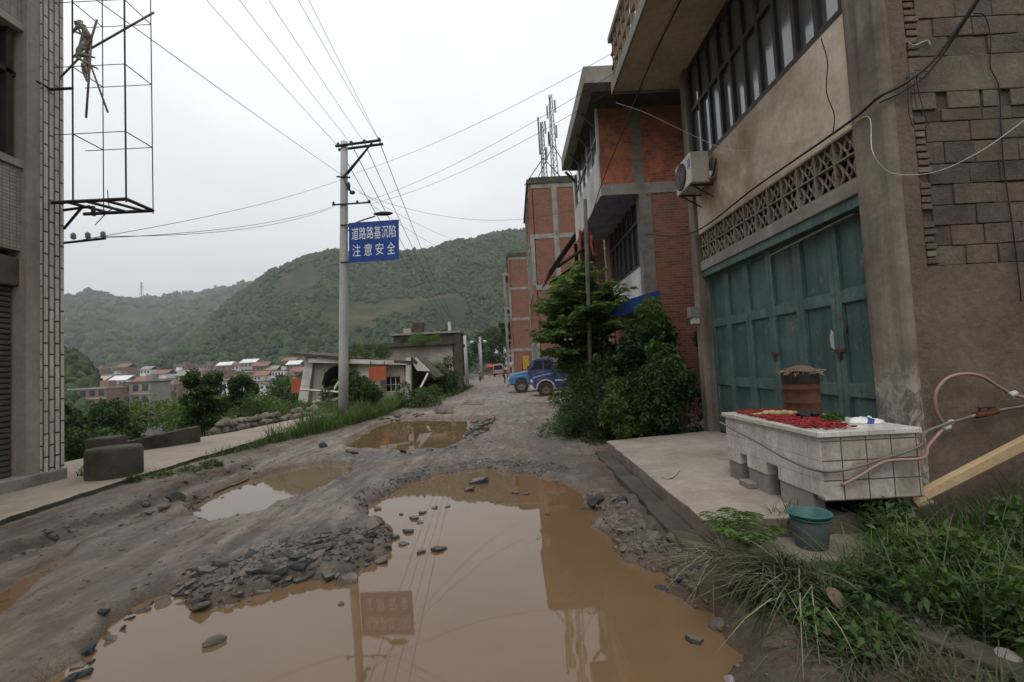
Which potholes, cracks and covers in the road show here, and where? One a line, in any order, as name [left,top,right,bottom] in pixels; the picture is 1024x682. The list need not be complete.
pothole [337,414,502,450]
pothole [19,462,791,682]
pothole [0,541,86,620]
